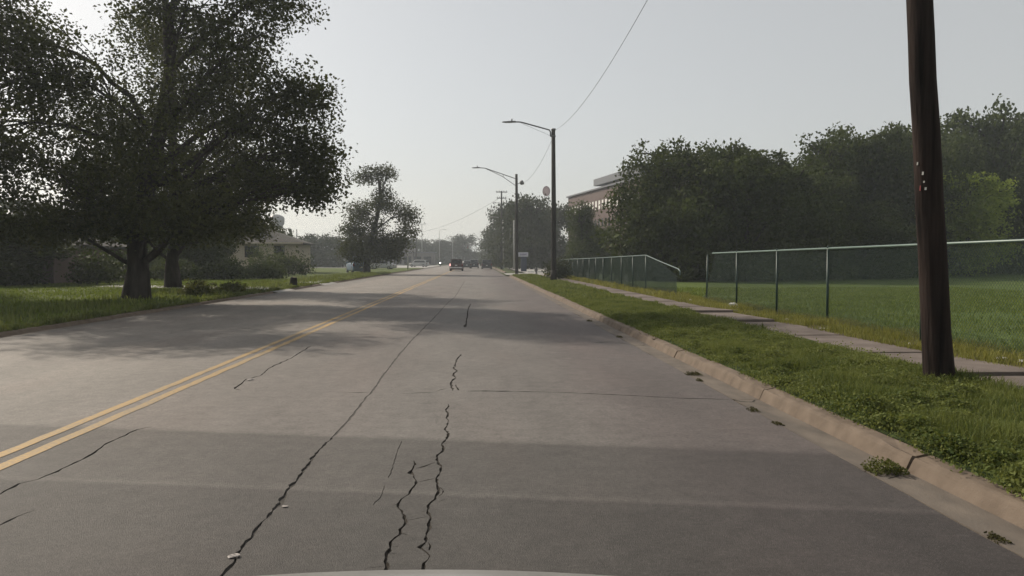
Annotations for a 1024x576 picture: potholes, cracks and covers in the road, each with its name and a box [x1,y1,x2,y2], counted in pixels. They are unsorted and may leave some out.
crack [234,347,308,390]
crack [0,427,148,494]
crack [356,355,705,570]
